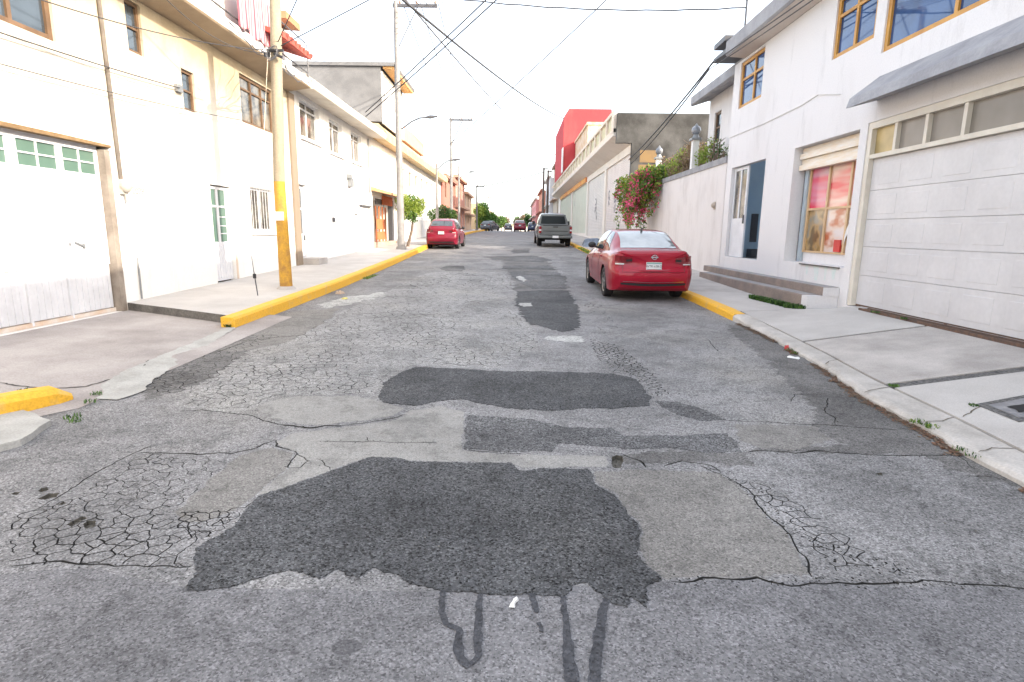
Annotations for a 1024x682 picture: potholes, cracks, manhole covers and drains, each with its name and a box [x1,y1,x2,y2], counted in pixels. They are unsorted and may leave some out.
crack [0,290,537,573]
pothole [611,455,623,468]
crack [590,339,669,396]
crack [665,461,912,585]
